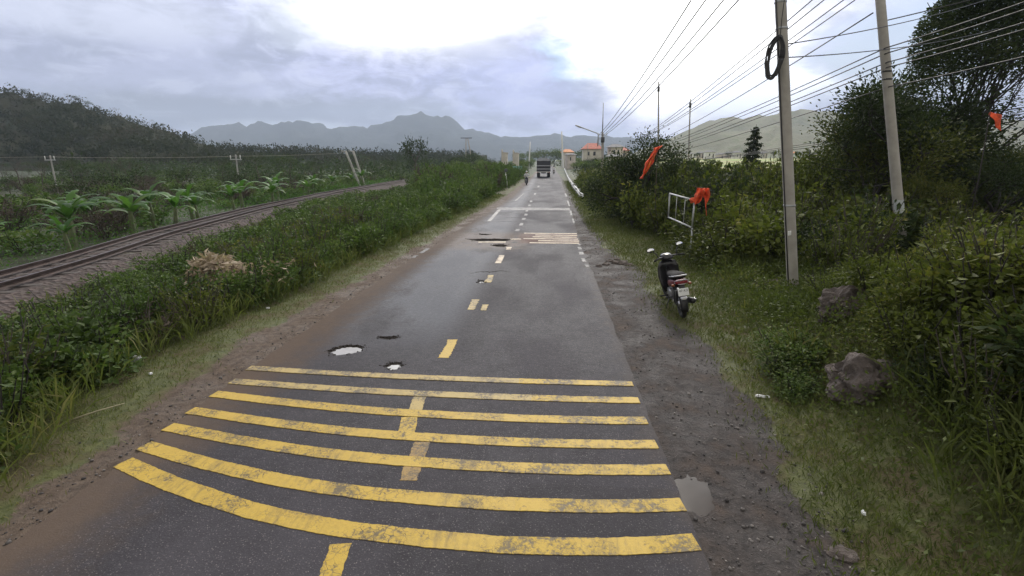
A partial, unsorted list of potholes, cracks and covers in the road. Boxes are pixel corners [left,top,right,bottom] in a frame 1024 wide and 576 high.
pothole [379,361,405,370]
pothole [324,343,367,356]
